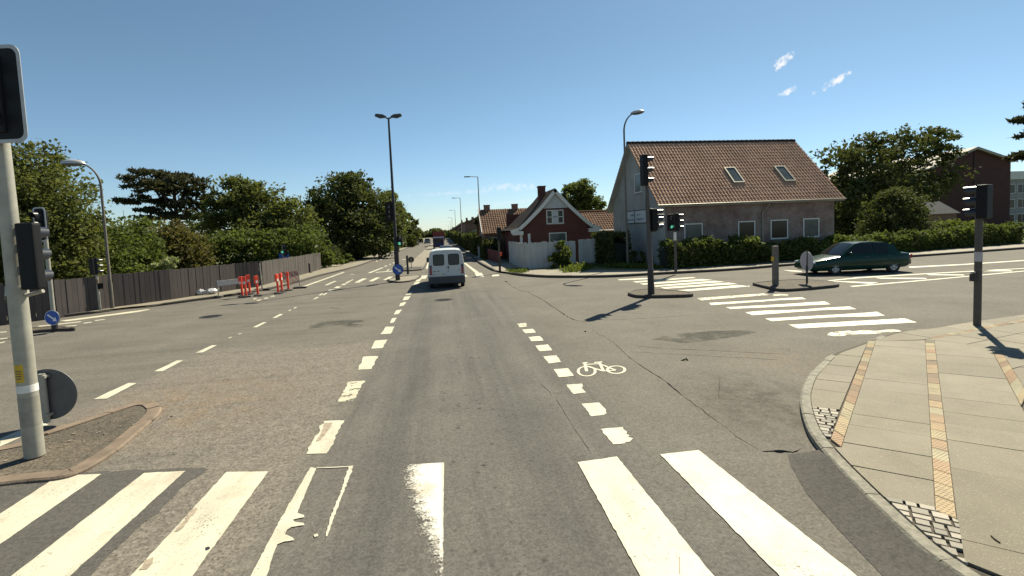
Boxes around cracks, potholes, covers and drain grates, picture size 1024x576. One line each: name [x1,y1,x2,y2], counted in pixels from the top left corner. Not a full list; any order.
crack [593,330,800,453]
